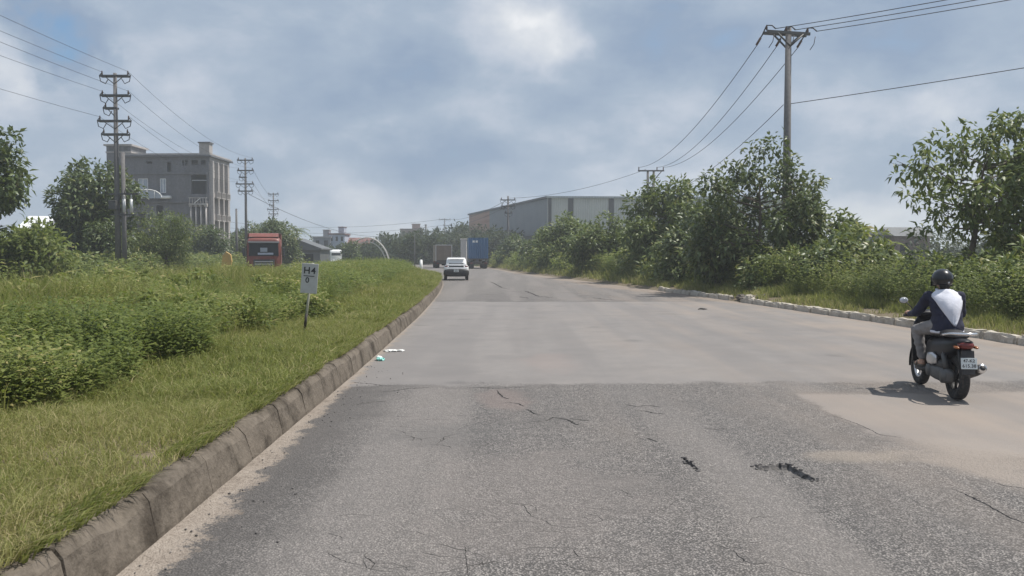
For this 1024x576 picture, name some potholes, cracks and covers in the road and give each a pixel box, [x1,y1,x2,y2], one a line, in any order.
crack [352,382,488,448]
crack [478,387,589,425]
pothole [750,462,819,482]
